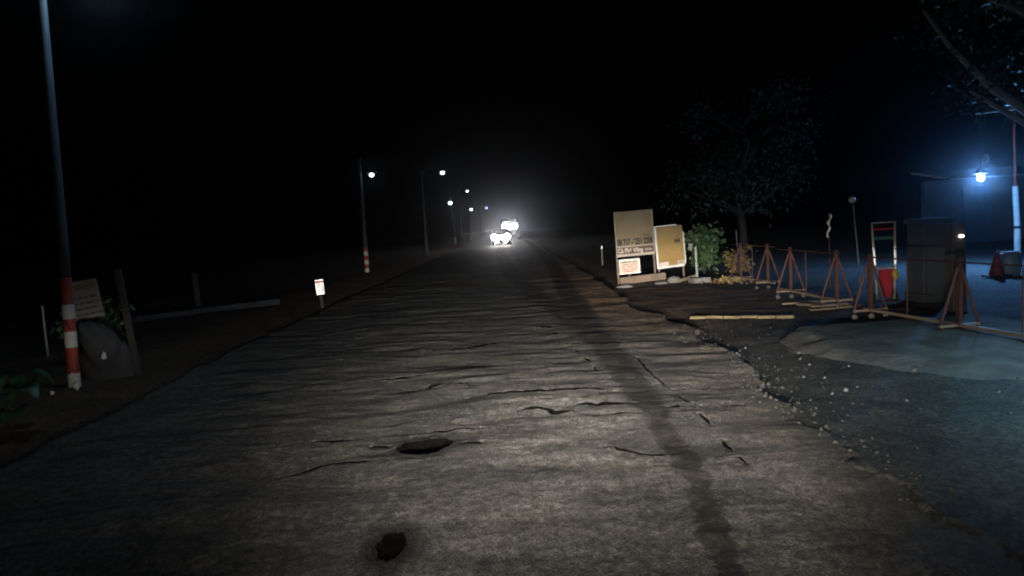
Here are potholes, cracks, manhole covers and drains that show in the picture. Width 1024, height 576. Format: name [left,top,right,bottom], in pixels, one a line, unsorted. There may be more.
crack [277,438,389,479]
crack [418,339,512,352]
crack [374,348,754,465]
pothole [370,436,481,456]
pothole [367,528,417,566]
